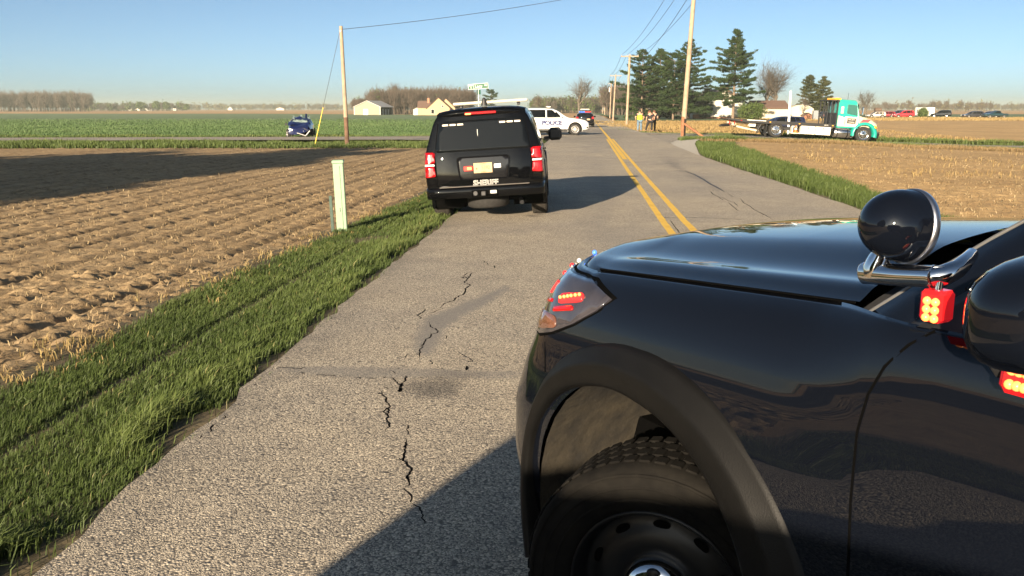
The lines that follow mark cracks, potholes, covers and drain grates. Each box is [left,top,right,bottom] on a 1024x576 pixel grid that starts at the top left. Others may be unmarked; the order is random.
crack [664,192,768,233]
crack [278,261,505,523]
